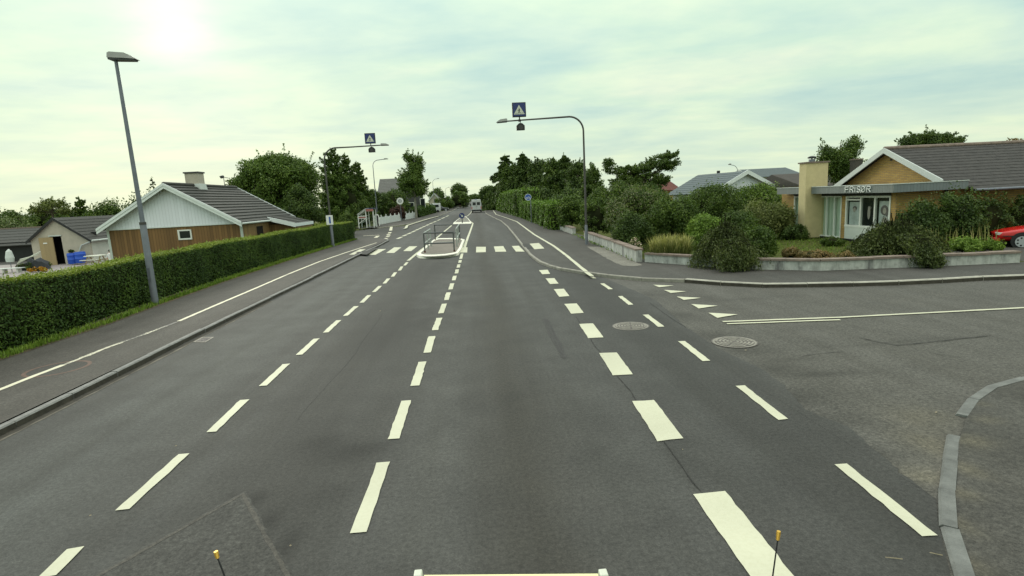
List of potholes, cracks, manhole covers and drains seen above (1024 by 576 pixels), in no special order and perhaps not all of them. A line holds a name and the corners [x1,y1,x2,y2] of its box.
crack [804,335,989,357]
manhole cover [711,336,758,348]
manhole cover [612,322,649,330]
